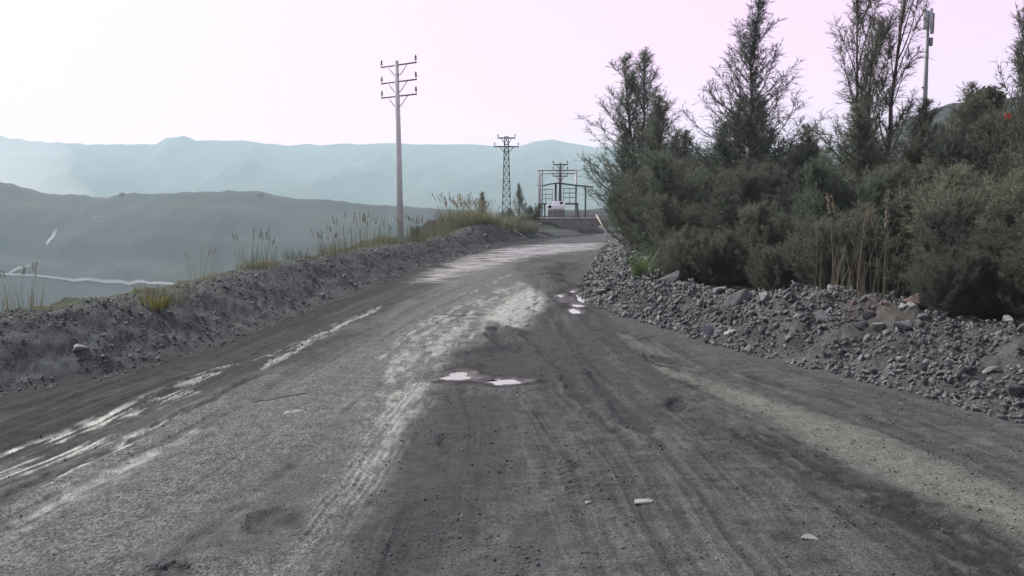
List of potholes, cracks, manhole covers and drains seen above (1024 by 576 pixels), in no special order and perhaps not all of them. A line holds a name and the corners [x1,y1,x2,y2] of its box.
pothole [243,508,305,534]
pothole [666,398,687,413]
pothole [428,342,562,388]
pothole [557,282,598,314]
